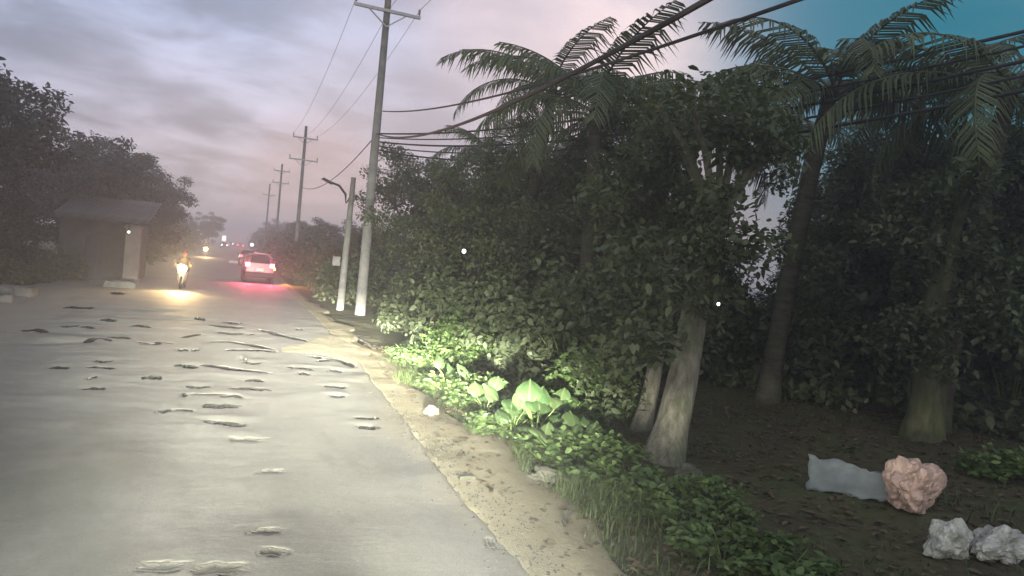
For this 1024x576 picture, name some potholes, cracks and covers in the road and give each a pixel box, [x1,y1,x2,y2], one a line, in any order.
pothole [181,561,259,576]
pothole [127,562,194,572]
pothole [255,547,291,557]
pothole [194,419,257,428]
